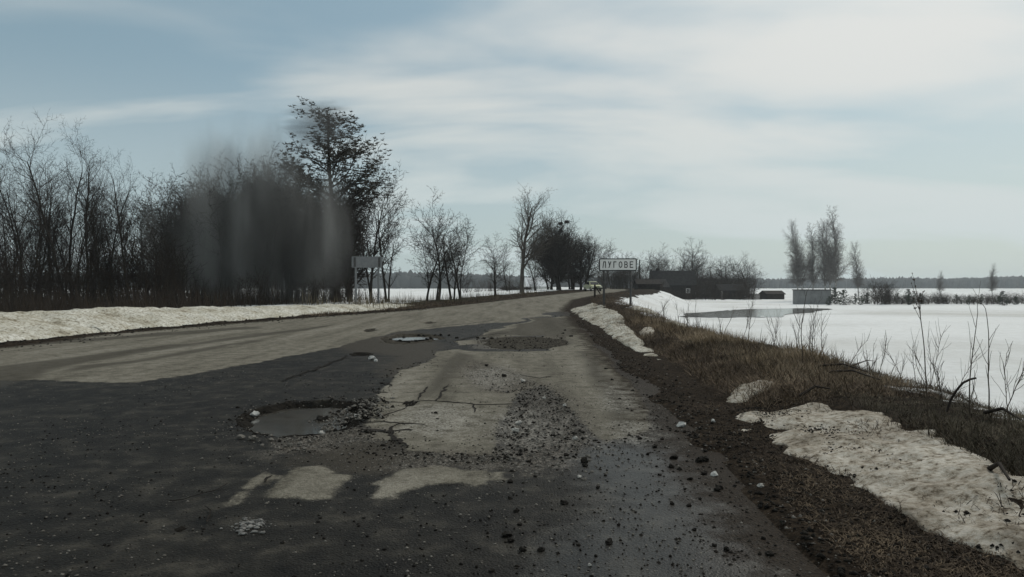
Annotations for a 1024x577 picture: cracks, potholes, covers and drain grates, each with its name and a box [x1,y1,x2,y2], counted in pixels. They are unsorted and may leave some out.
pothole [480,337,567,350]
crack [359,382,530,446]
pothole [380,333,446,345]
pothole [235,398,364,438]
